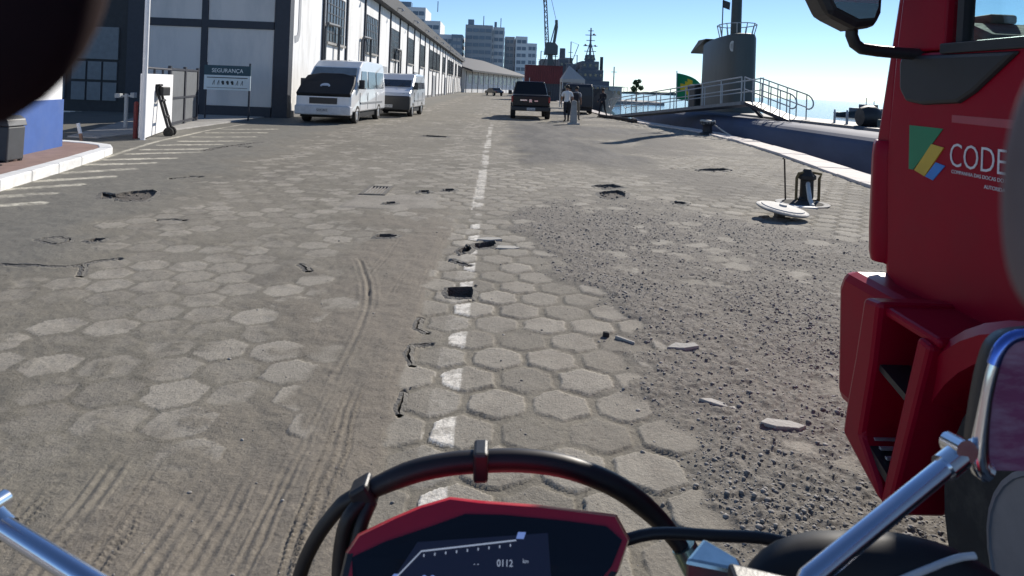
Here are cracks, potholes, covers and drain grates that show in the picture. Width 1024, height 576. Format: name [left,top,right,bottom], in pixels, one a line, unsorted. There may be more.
pothole [454,244,476,256]
crack [0,236,118,277]
manhole cover [756,201,809,218]
pothole [469,240,500,250]
pothole [441,284,479,301]
pothole [96,189,162,202]
pothole [595,189,630,200]
drain grate [359,185,394,195]
